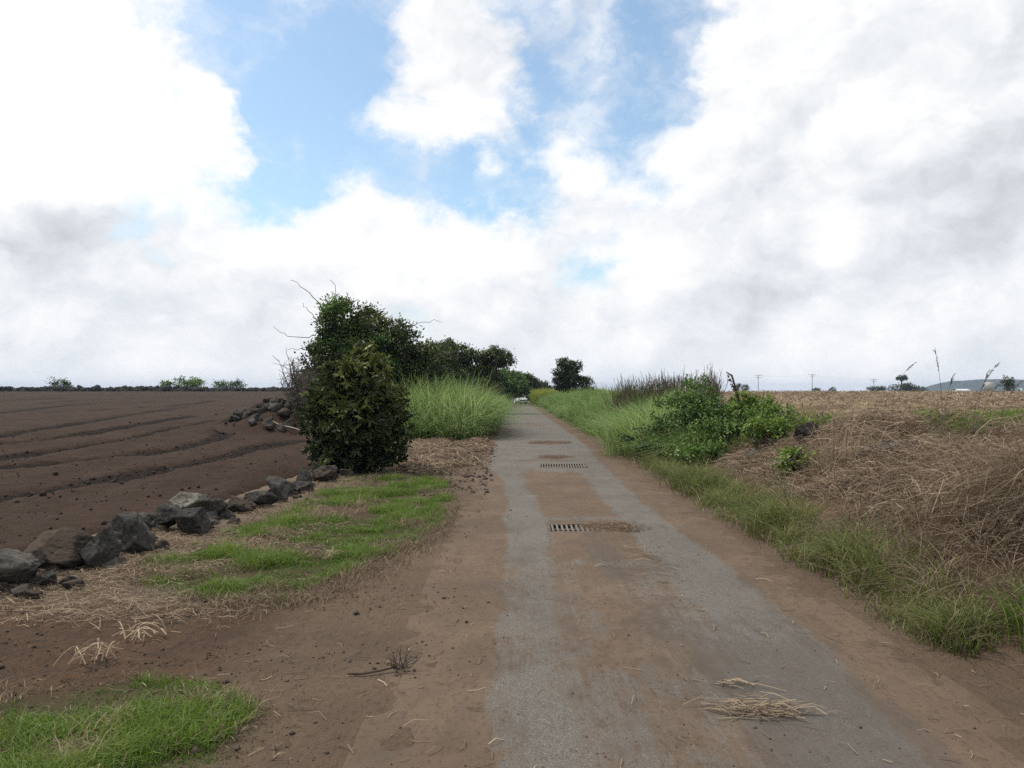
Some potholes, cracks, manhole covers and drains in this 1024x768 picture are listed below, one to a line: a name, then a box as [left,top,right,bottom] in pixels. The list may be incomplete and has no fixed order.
drain grate [546,523,640,532]
